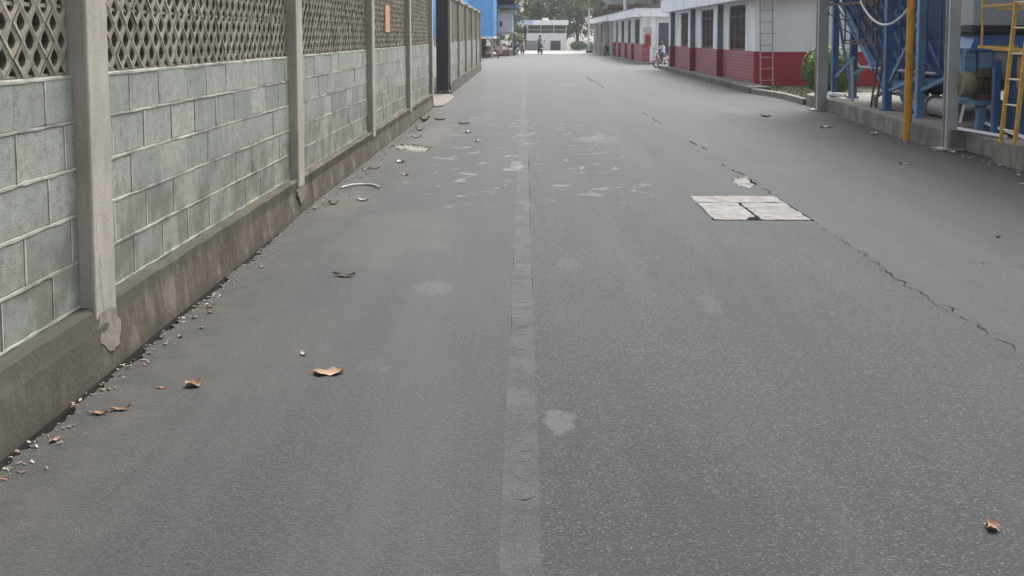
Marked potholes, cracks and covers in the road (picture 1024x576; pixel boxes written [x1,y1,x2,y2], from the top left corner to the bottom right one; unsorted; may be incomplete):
manhole cover [690,196,812,221]
